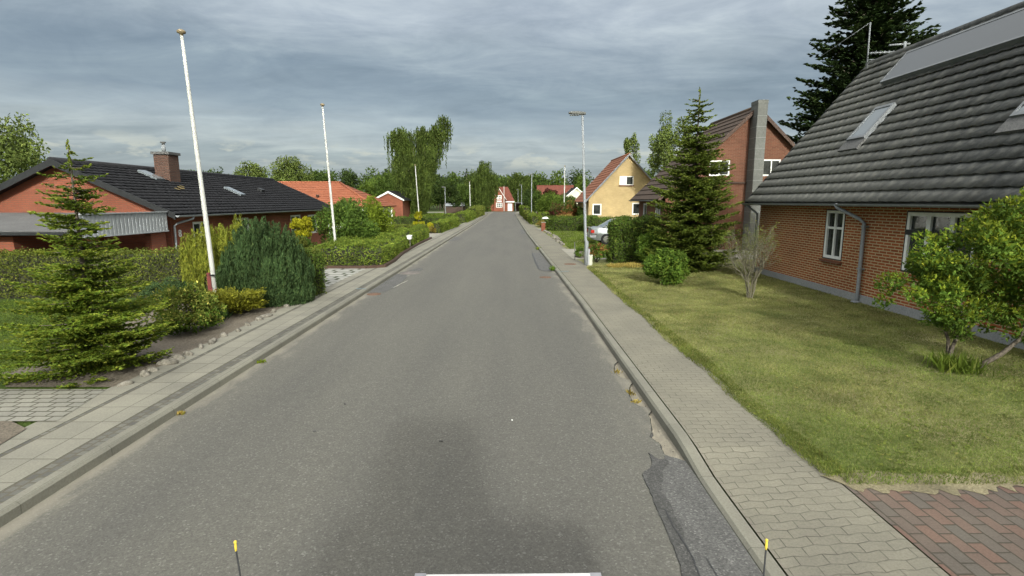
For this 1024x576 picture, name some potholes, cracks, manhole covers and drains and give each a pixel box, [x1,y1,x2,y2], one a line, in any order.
pothole [649,411,685,461]
pothole [614,362,630,380]
pothole [629,383,649,408]
